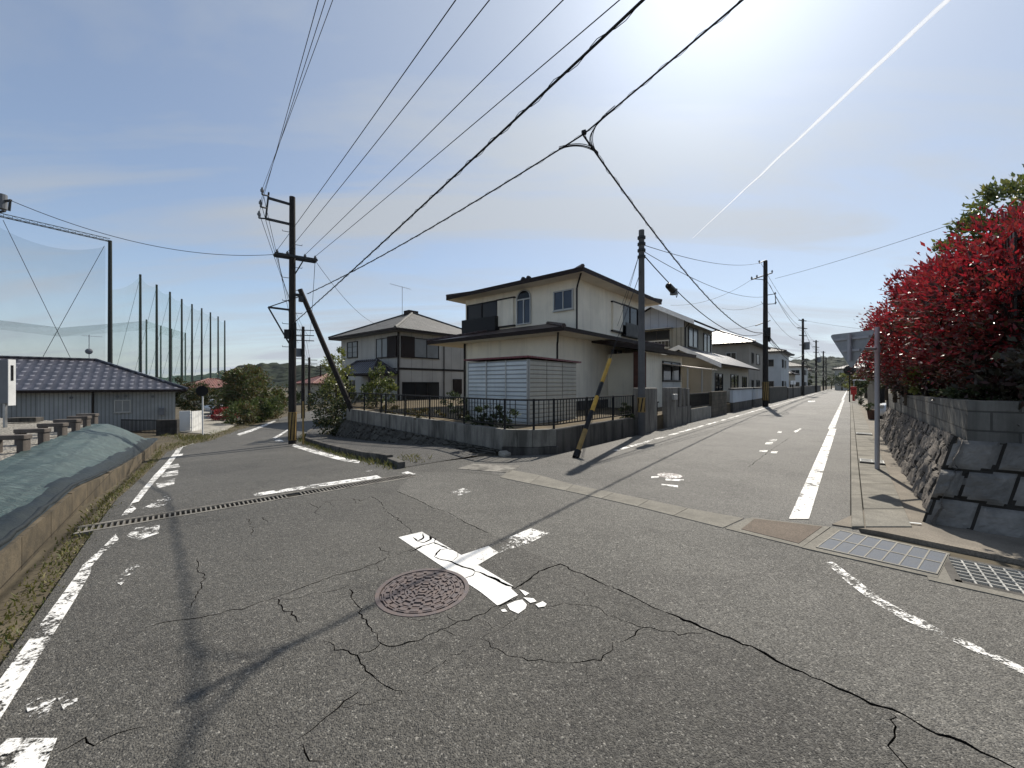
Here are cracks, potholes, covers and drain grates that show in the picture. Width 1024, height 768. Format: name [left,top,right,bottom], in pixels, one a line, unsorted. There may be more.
crack [35,491,702,762]
drain grate [944,556,1024,596]
manhole cover [375,568,469,620]
